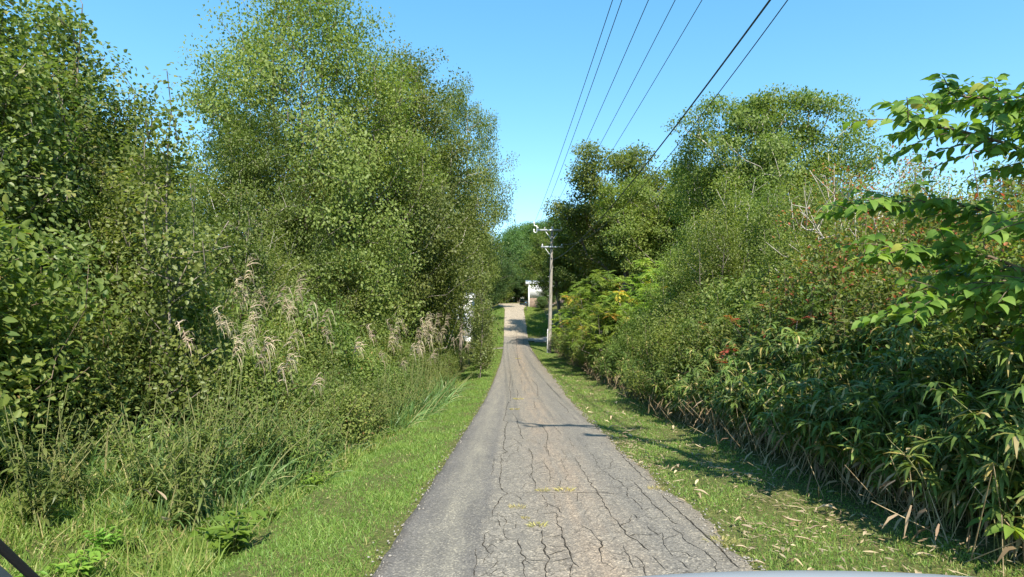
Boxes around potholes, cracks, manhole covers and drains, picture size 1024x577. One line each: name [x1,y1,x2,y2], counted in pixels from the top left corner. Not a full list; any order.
crack [503,333,739,577]
